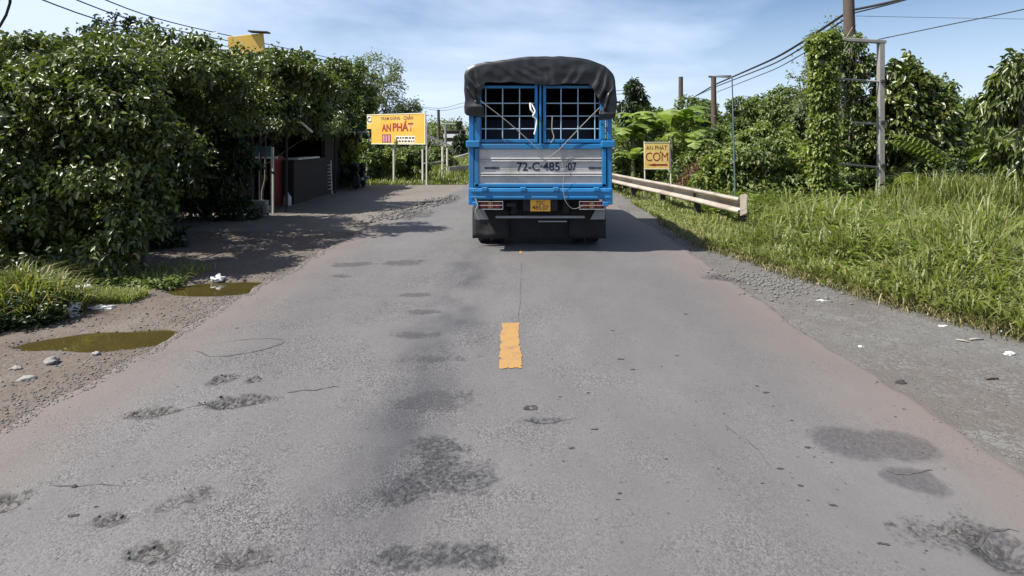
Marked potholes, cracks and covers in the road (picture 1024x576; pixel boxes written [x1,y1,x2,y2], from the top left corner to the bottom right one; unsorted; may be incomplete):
pothole [124,407,179,419]
crack [198,338,286,356]
pothole [210,374,237,385]
pothole [95,514,127,526]
pothole [157,487,215,510]
crack [163,386,340,415]
pothole [126,541,177,564]
pothole [198,394,278,410]
